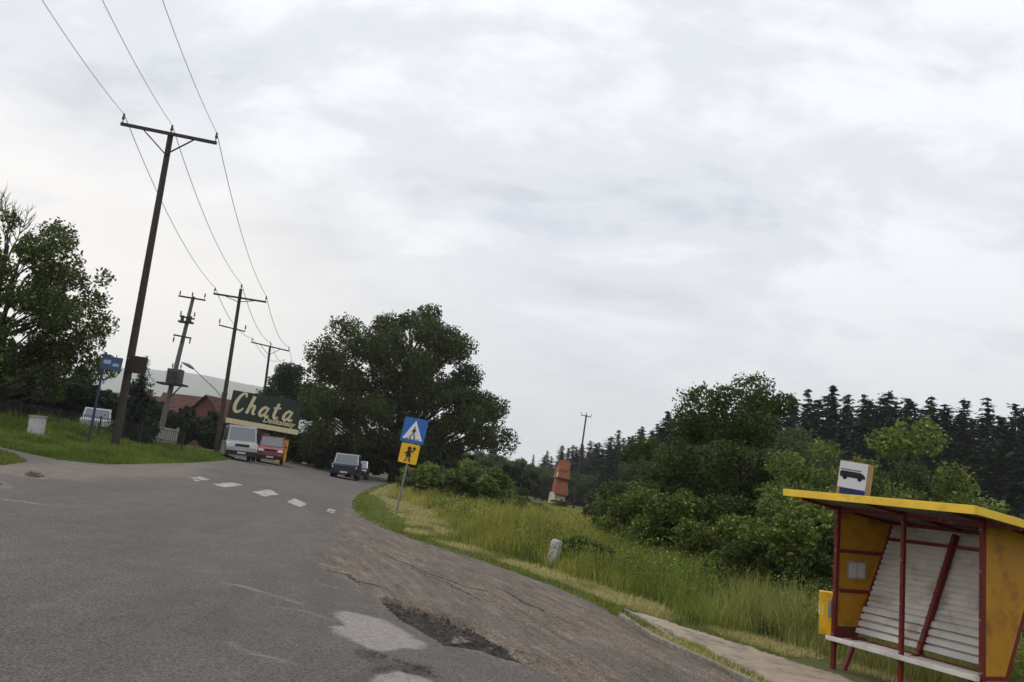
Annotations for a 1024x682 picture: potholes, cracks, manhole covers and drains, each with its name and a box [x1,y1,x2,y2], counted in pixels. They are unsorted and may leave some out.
crack [325,569,387,589]
crack [383,553,491,598]
pothole [367,594,557,671]
crack [498,588,545,612]
